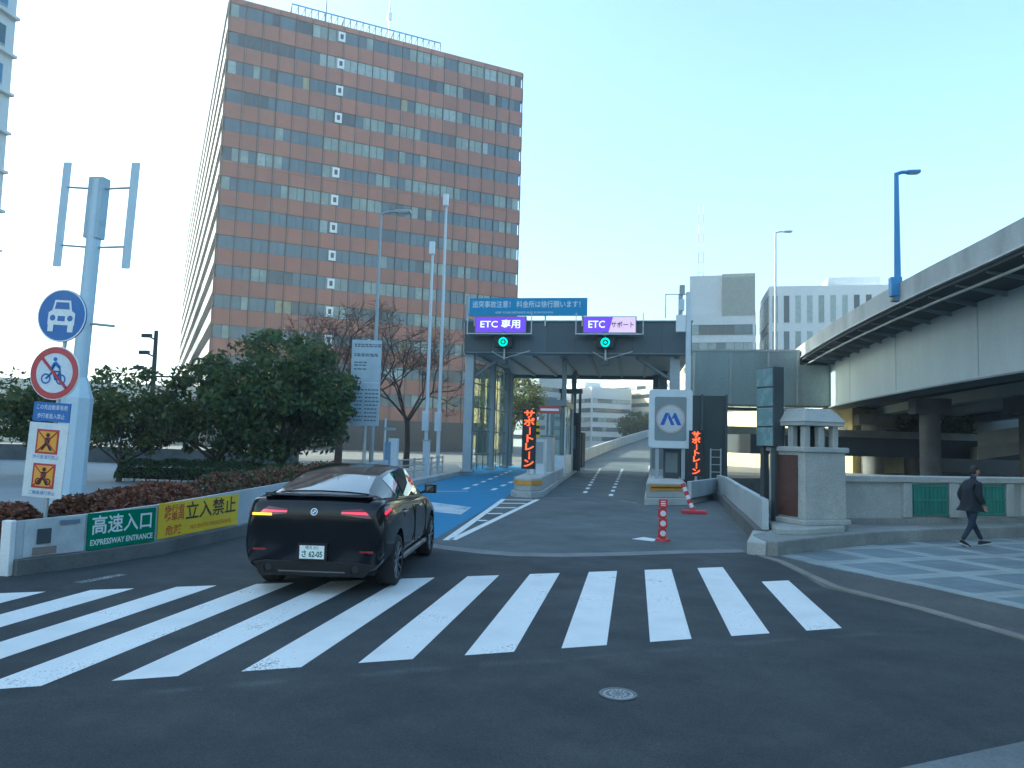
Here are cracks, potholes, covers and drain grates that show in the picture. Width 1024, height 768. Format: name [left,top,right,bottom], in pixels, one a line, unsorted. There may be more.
manhole cover [598,687,638,701]
